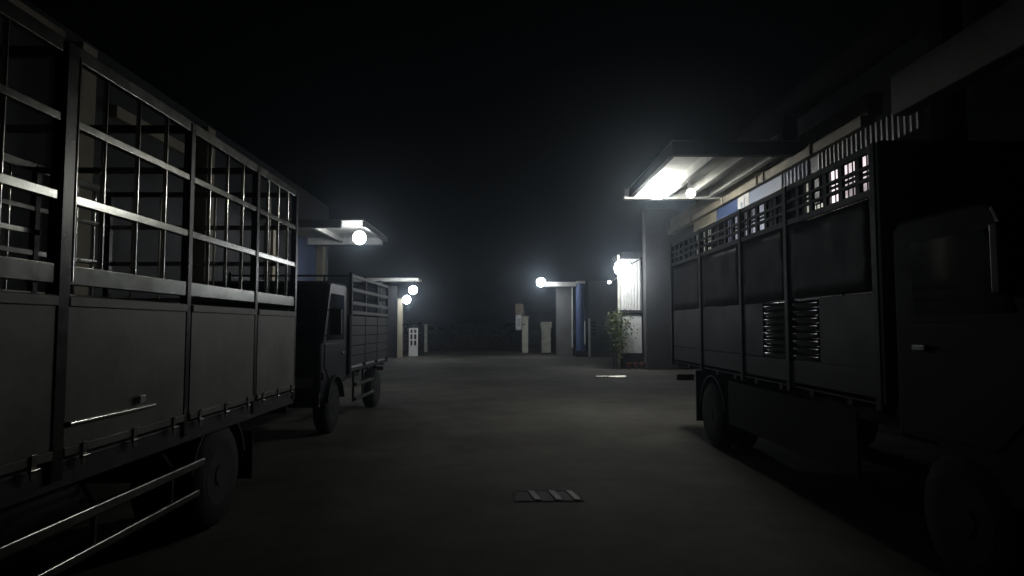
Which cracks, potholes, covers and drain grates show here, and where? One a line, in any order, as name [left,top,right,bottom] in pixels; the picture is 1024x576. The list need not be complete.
drain grate [514,490,584,502]
